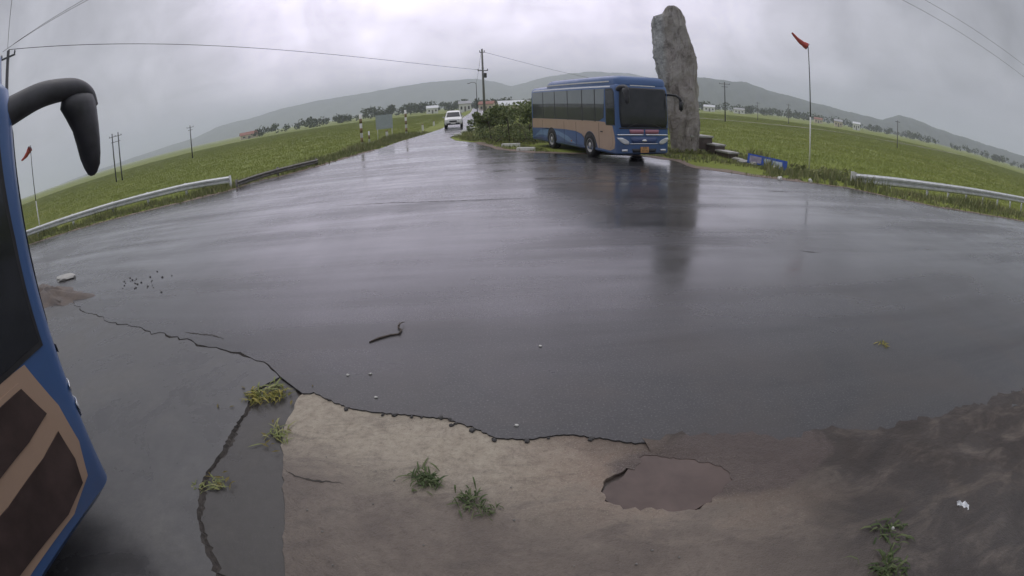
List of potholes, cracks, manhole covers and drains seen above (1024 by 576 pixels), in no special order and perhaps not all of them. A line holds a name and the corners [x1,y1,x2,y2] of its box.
crack [73,302,280,576]
crack [286,470,343,484]
